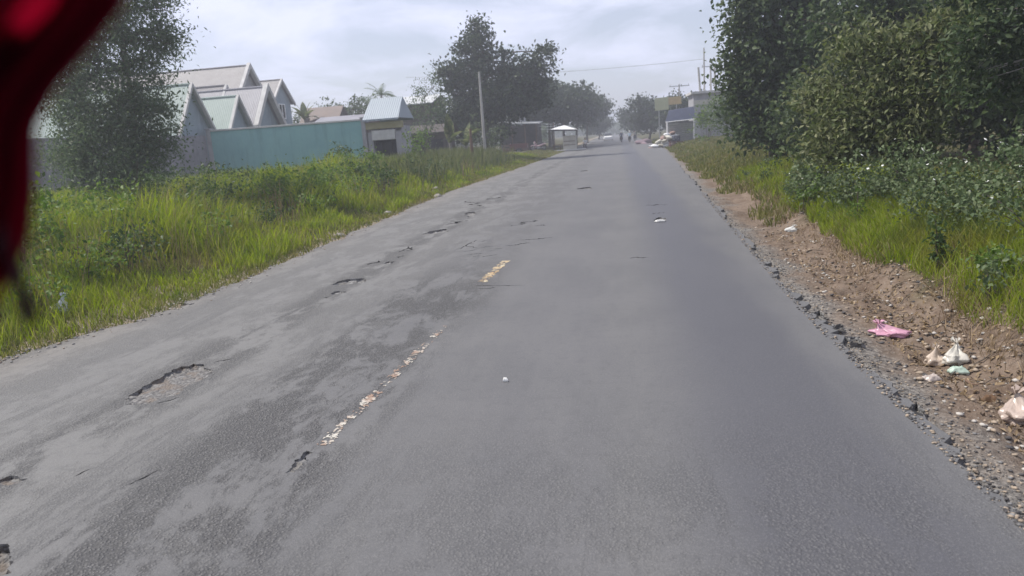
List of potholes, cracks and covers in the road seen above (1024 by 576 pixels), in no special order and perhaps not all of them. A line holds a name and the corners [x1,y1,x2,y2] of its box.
pothole [125,364,213,405]
pothole [0,475,28,485]
crack [449,197,550,257]
pothole [0,544,13,576]
